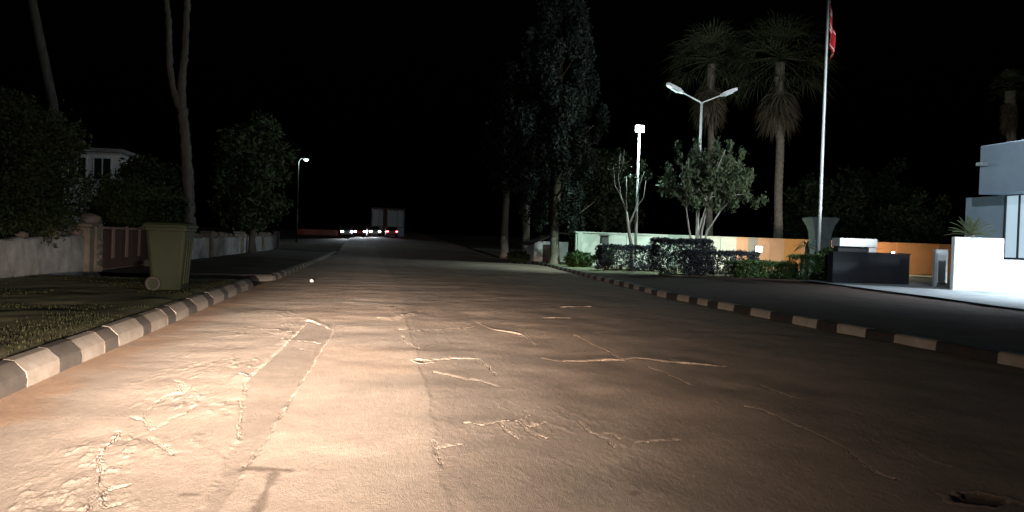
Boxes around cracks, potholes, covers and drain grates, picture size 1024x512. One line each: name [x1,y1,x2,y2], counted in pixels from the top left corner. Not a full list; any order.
crack [431,407,548,465]
crack [377,306,725,387]
pothole [936,489,1024,511]
crack [745,385,896,479]
crack [236,320,332,467]
crack [83,380,195,512]
